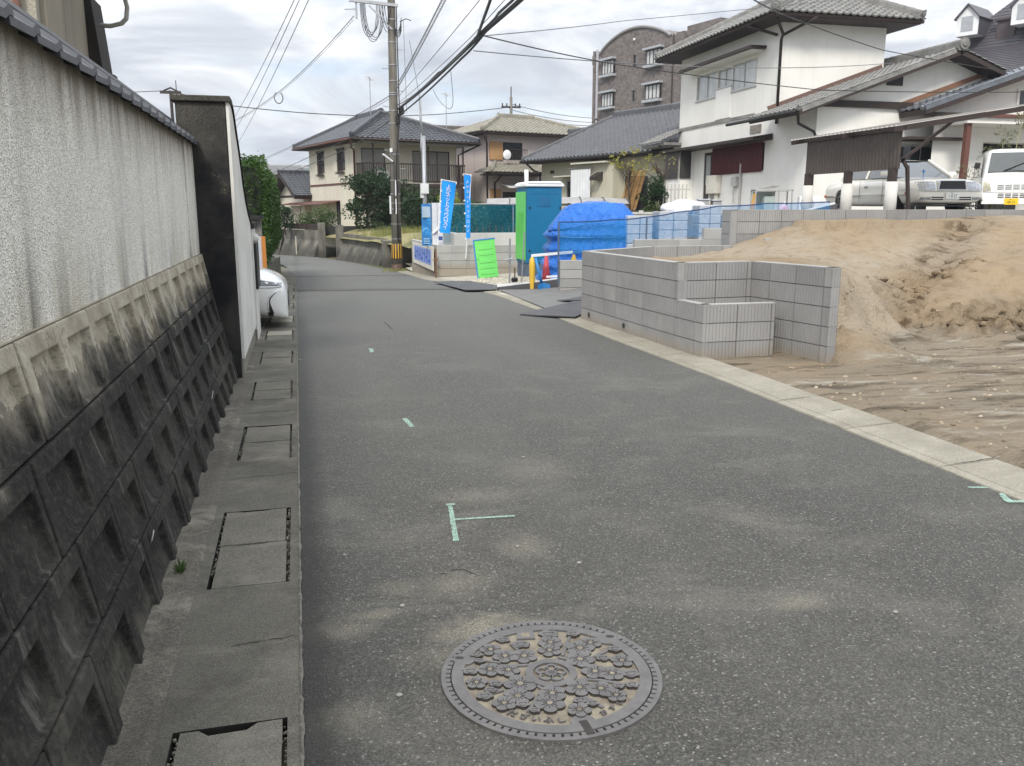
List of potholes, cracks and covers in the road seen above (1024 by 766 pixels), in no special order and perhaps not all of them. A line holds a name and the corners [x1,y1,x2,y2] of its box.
crack [231,635,299,647]
manhole cover [441,620,663,743]
